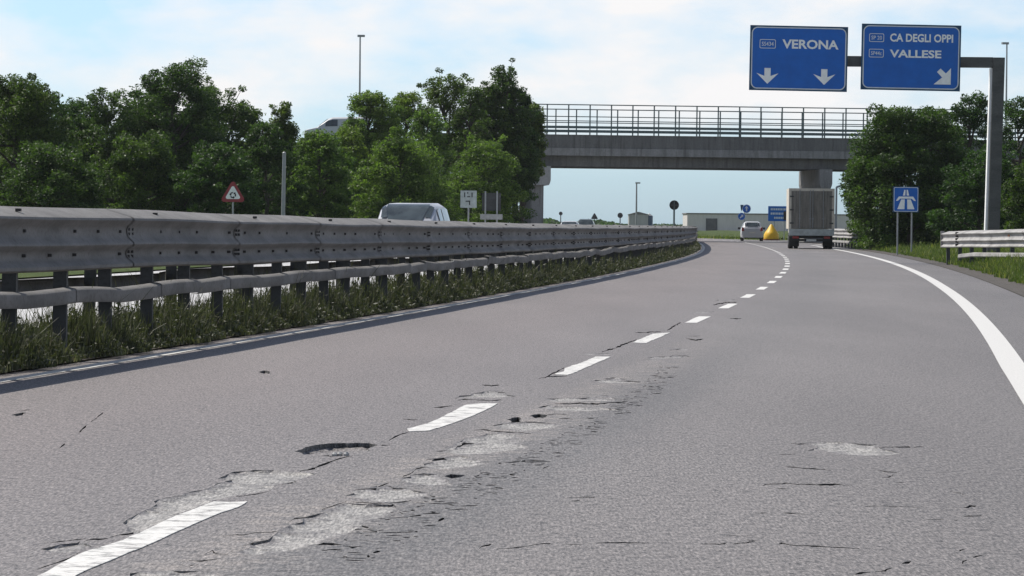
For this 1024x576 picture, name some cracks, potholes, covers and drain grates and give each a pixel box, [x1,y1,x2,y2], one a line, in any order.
crack [926,491,982,521]
crack [856,549,982,575]
pothole [123,470,315,534]
pothole [295,443,377,455]
crack [188,368,673,566]
pothole [807,441,901,456]
pothole [346,486,428,502]
pothole [237,503,396,555]
pothole [439,434,527,455]
crack [763,443,849,489]
